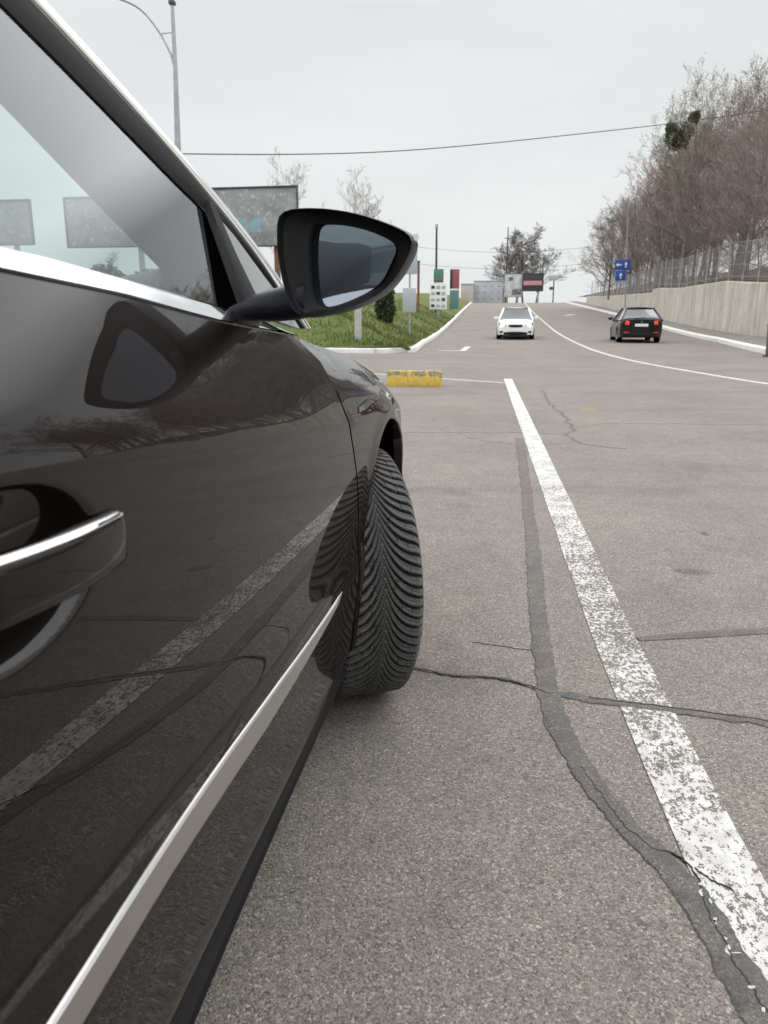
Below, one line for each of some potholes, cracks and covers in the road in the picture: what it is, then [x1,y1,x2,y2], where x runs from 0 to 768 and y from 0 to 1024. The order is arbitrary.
crack [402,389,762,449]
crack [413,667,768,728]
